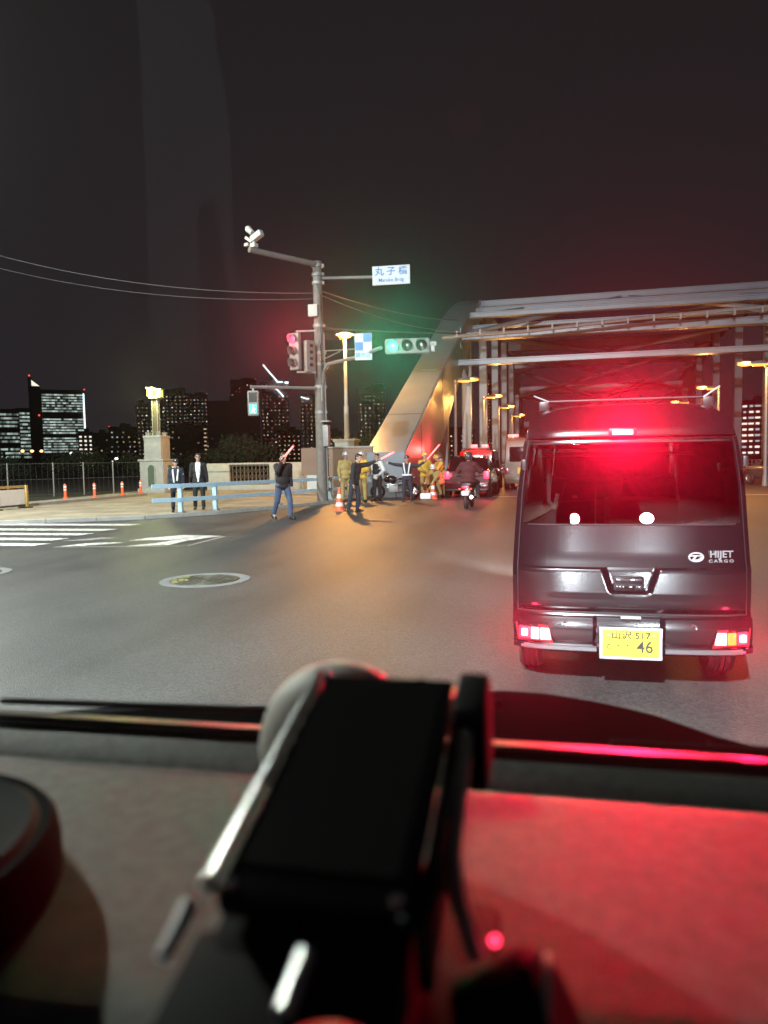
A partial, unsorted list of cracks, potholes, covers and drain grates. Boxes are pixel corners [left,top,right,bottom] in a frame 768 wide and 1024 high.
manhole cover [159,573,250,588]
